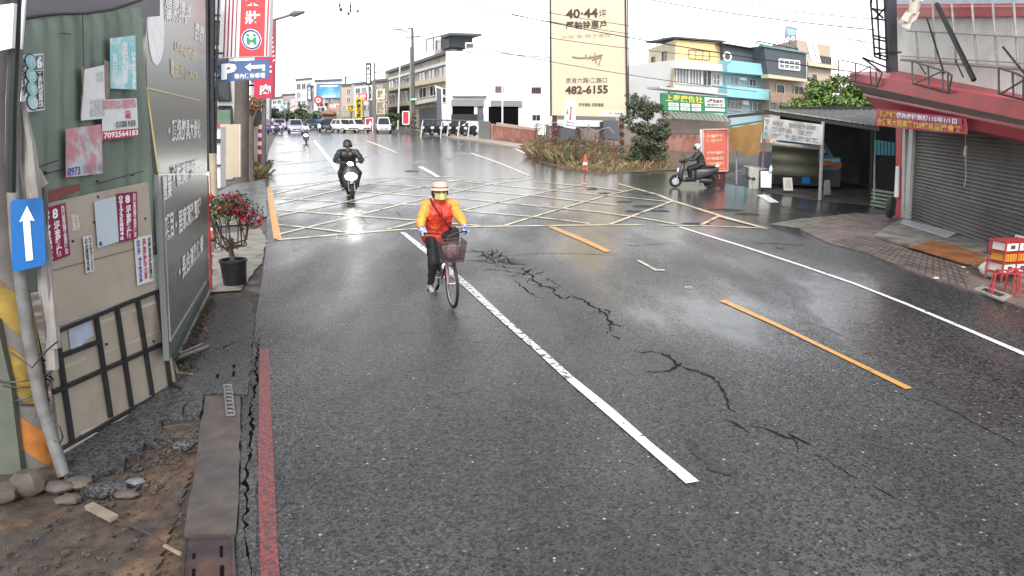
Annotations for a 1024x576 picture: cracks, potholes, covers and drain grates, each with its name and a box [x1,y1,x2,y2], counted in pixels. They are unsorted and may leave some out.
crack [464,249,899,500]
crack [240,339,260,575]
drain grate [223,384,235,416]
